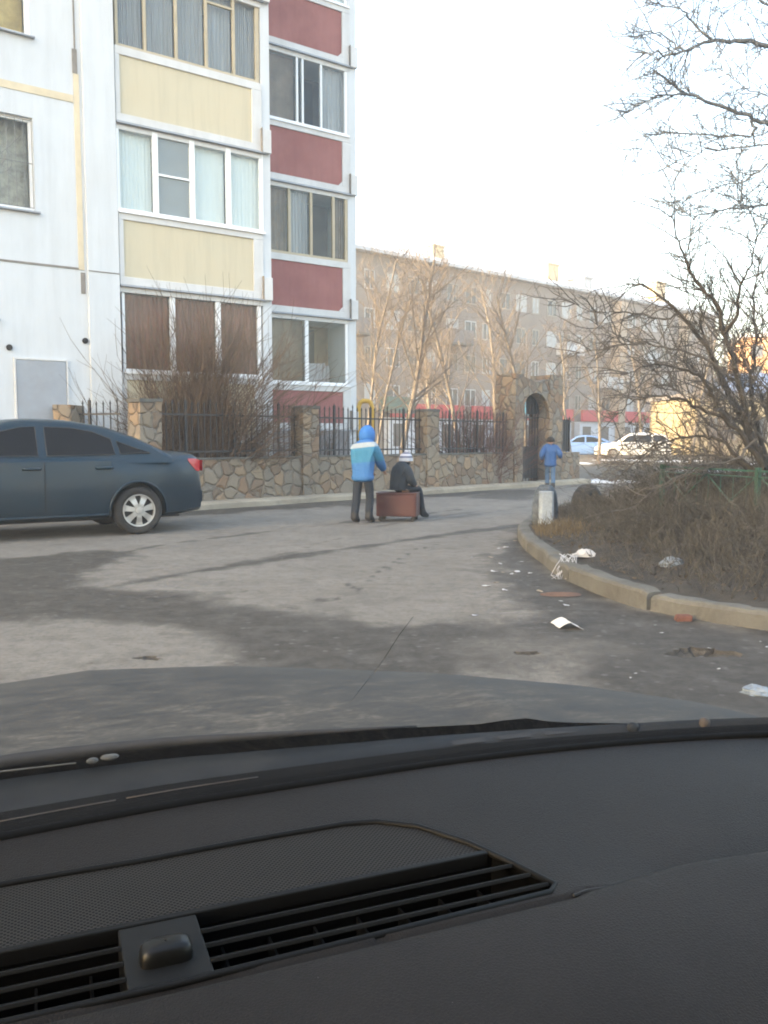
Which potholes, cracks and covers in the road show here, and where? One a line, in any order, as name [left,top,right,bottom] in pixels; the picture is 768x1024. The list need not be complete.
pothole [664,646,745,658]
